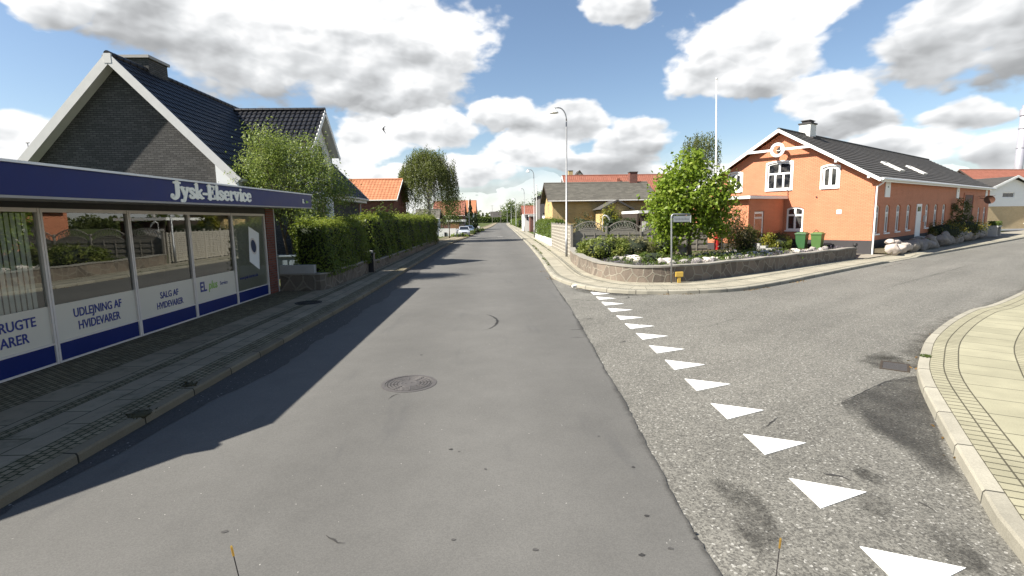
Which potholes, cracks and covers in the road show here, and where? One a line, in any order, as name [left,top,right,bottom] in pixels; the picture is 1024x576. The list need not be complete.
drain grate [879,360,910,373]
manhole cover [381,375,437,393]
